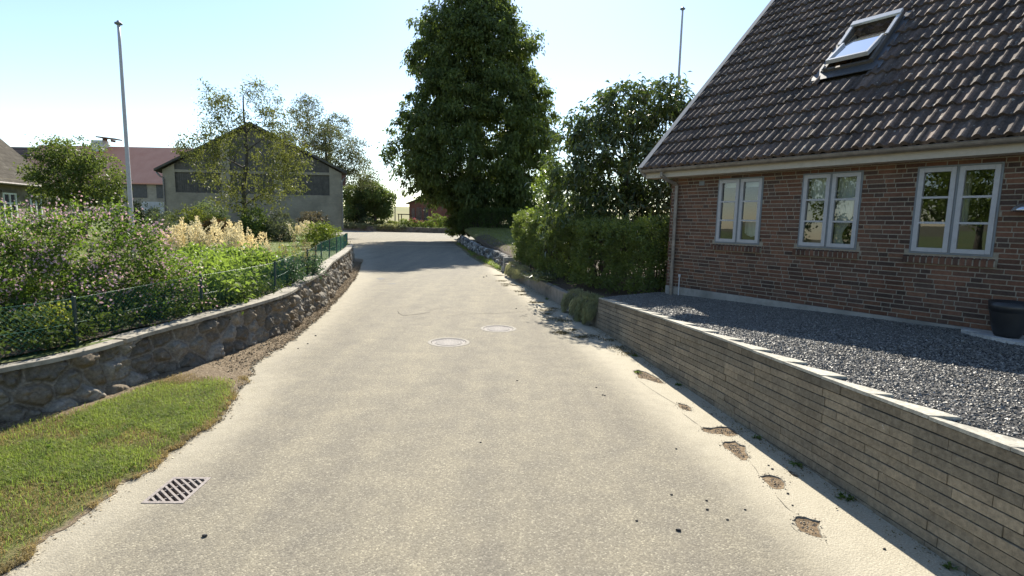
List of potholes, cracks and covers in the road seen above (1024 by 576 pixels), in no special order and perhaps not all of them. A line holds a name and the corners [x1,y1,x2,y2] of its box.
manhole cover [428,337,470,347]
pothole [758,472,791,494]
drain grate [141,477,212,504]
pothole [700,425,741,438]
pothole [632,369,665,384]
pothole [719,439,752,462]
pothole [789,513,827,541]
